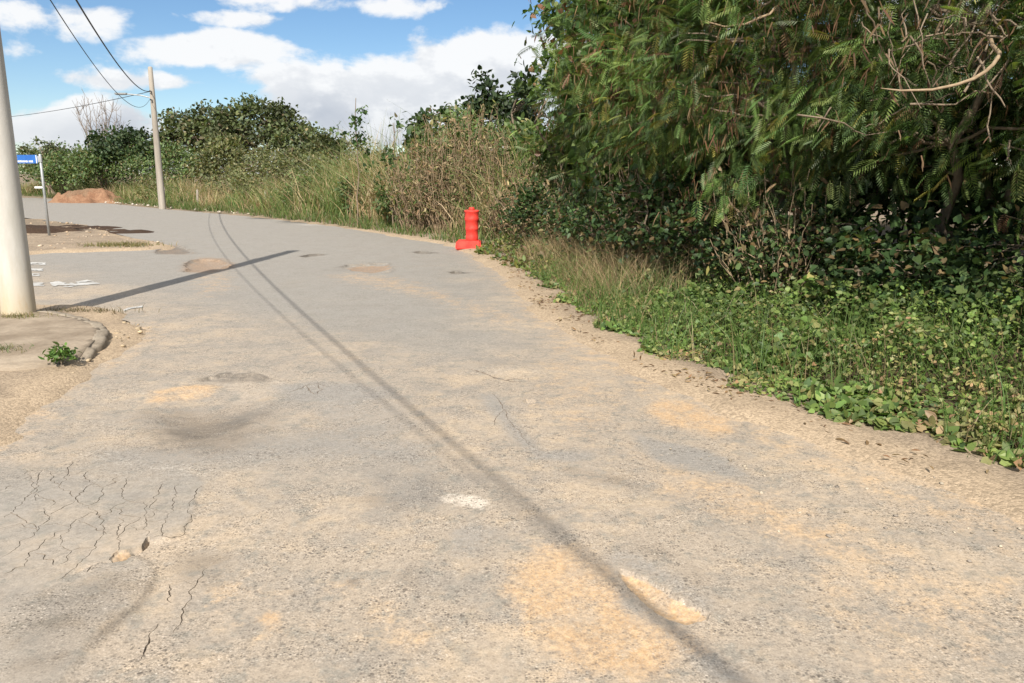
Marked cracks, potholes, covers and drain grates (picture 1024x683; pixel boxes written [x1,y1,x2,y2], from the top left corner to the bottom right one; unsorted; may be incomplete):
crack [0,463,202,580]
crack [141,567,208,659]
pothole [109,536,150,563]
crack [471,369,538,449]
pothole [131,373,288,446]
